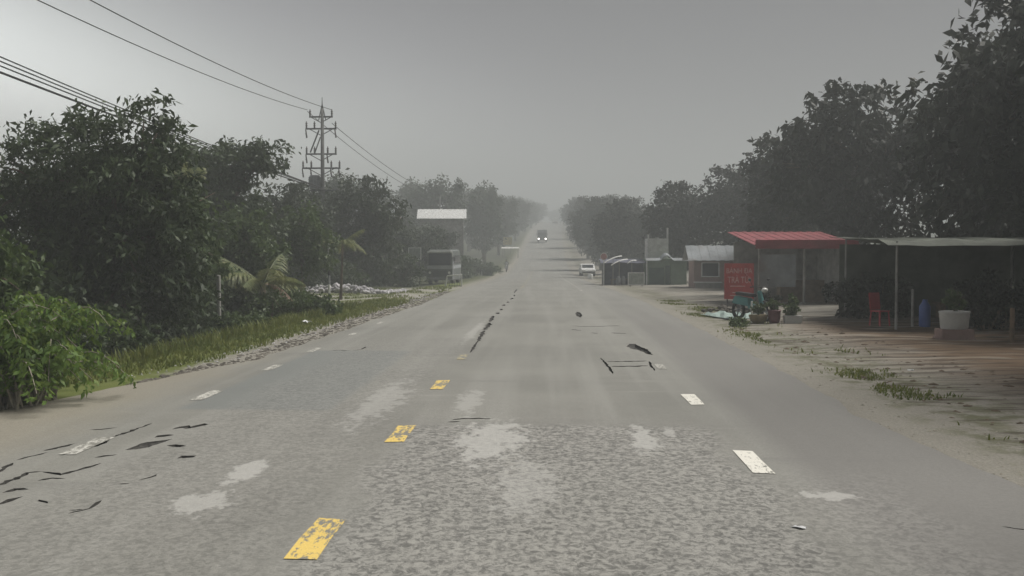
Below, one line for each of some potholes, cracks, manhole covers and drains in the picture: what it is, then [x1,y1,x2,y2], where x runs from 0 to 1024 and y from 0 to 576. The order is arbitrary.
crack [68,500,102,514]
crack [470,289,517,353]
pothole [627,344,653,355]
crack [600,358,655,374]
crack [0,423,152,504]
